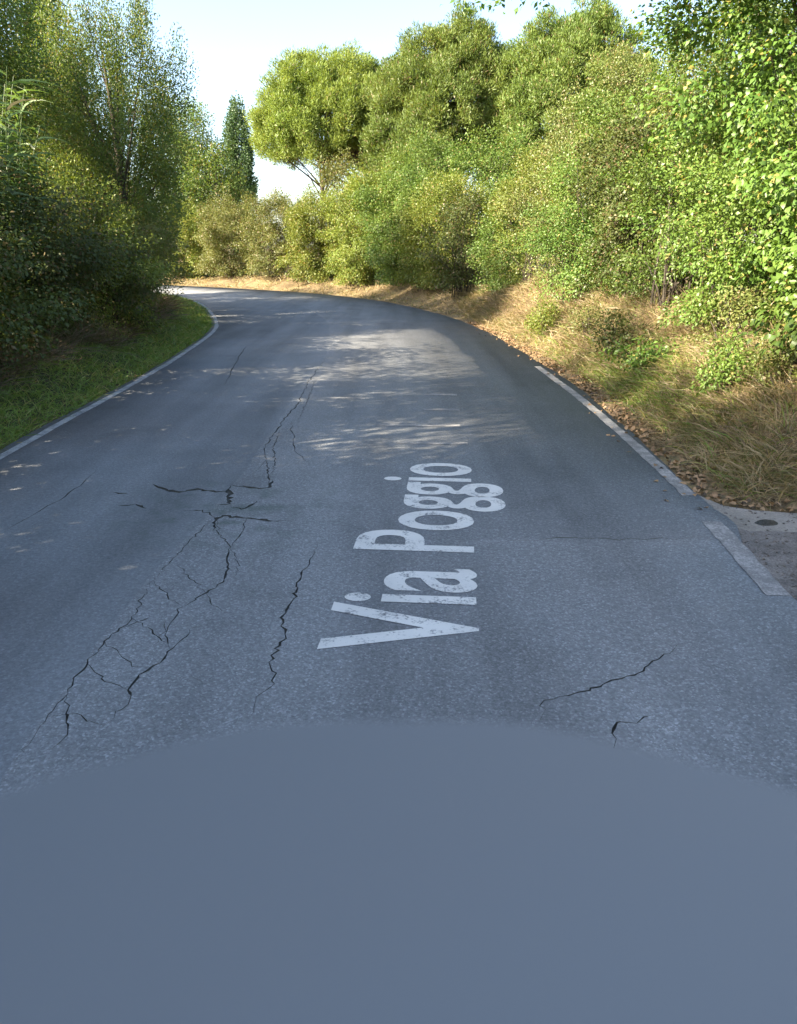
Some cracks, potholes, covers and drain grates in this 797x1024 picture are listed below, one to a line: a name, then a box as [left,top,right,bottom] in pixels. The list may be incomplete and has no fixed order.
crack [15,359,325,759]
crack [611,715,651,746]
crack [539,644,680,717]
